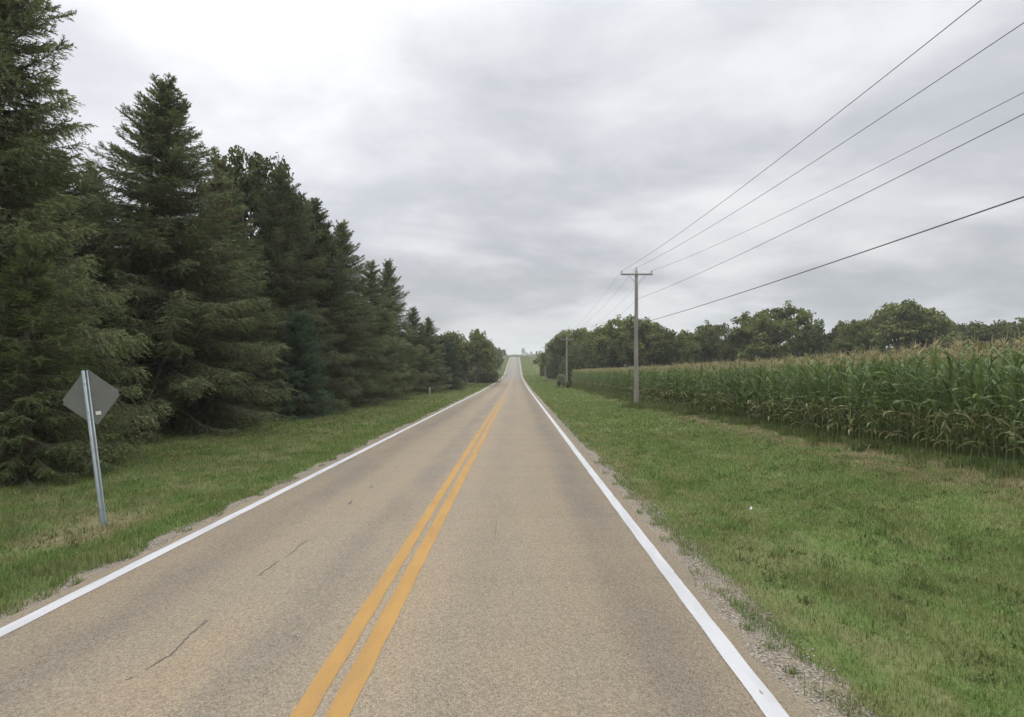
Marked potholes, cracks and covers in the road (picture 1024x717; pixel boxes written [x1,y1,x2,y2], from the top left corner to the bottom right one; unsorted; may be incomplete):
crack [125,620,207,680]
